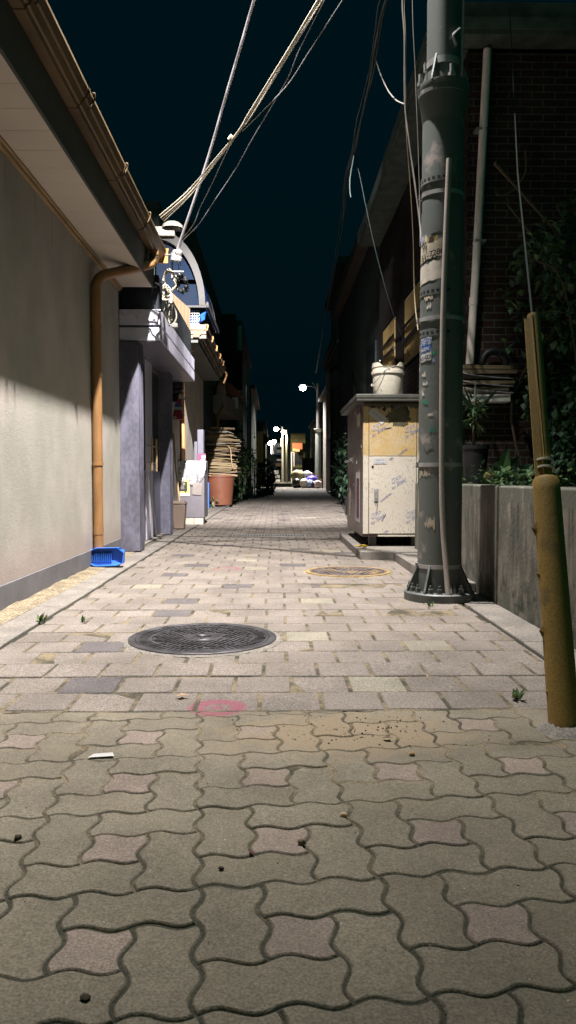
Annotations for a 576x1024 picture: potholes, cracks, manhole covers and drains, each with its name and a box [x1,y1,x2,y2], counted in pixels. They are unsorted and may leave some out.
manhole cover [122,623,283,658]
manhole cover [302,566,394,578]
